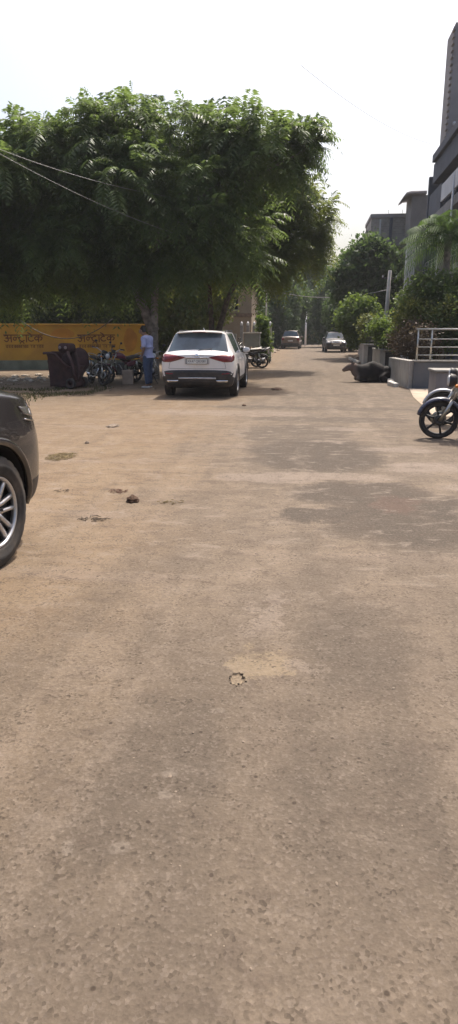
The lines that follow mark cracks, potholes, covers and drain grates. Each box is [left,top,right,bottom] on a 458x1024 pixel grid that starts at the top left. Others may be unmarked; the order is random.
pothole [229,672,247,687]
